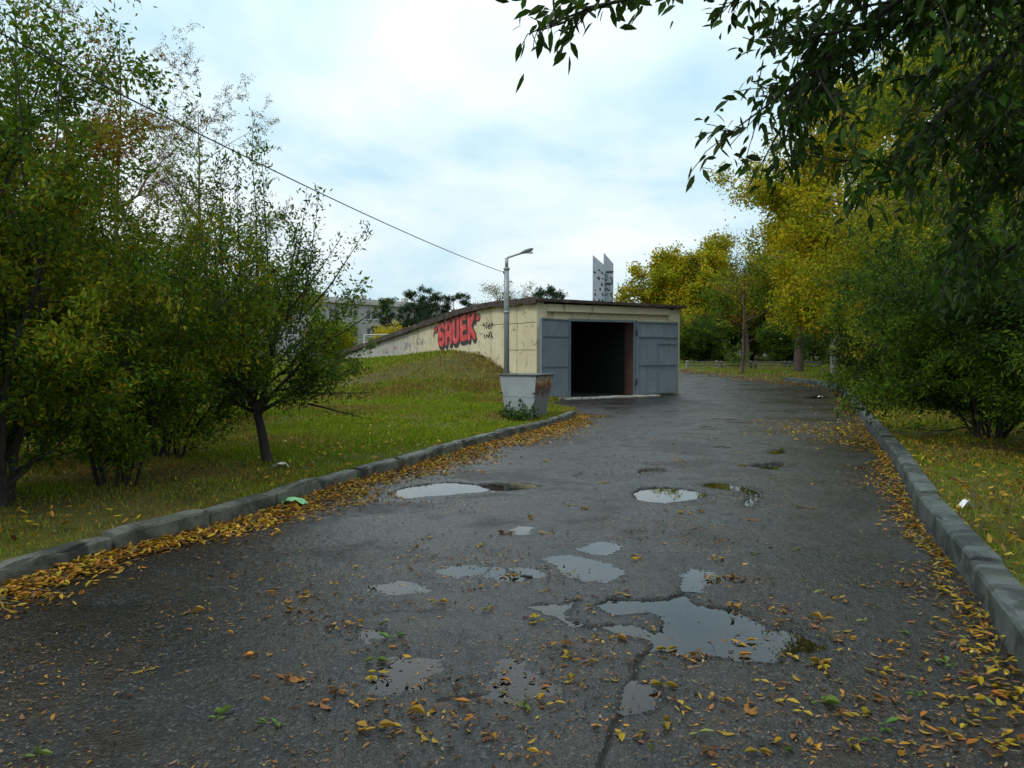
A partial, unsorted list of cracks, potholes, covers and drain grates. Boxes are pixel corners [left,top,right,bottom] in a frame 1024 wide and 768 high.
pothole [611,678,673,718]
pothole [389,481,545,499]
pothole [524,598,595,630]
pothole [629,486,714,504]
pothole [590,591,833,666]
pothole [747,462,789,470]
pothole [697,482,766,508]
